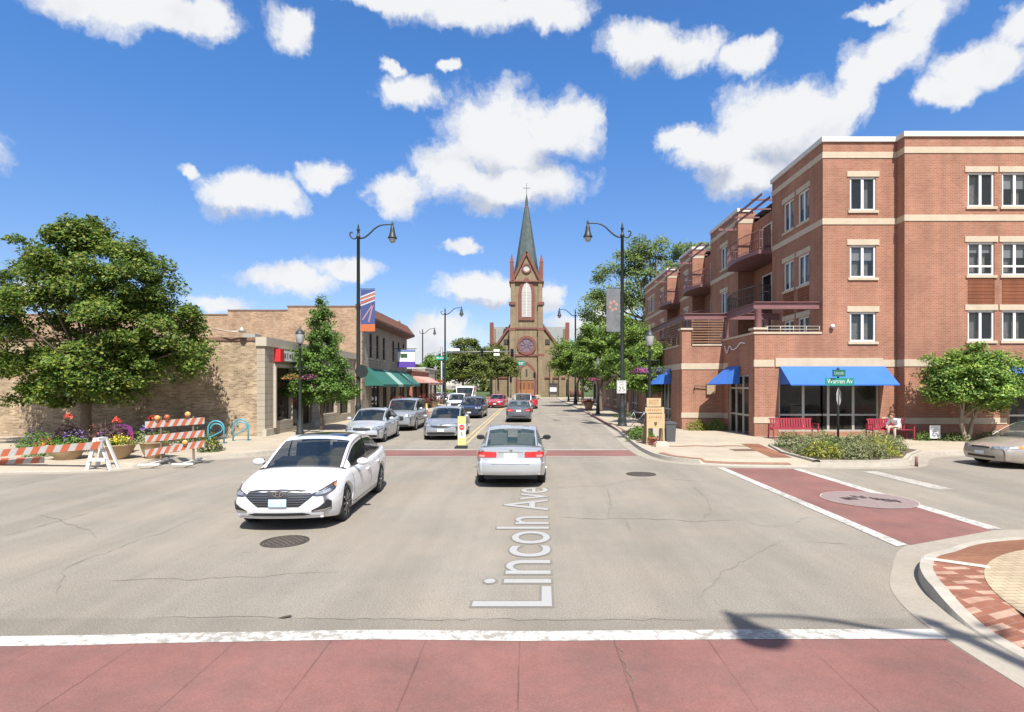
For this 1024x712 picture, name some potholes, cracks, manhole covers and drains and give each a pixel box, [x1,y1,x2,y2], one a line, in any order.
crack [114,571,345,581]
crack [551,478,732,531]
crack [9,504,122,535]
crack [610,632,641,712]
crack [56,518,198,596]
manhole cover [260,535,310,548]
crack [700,541,781,597]
